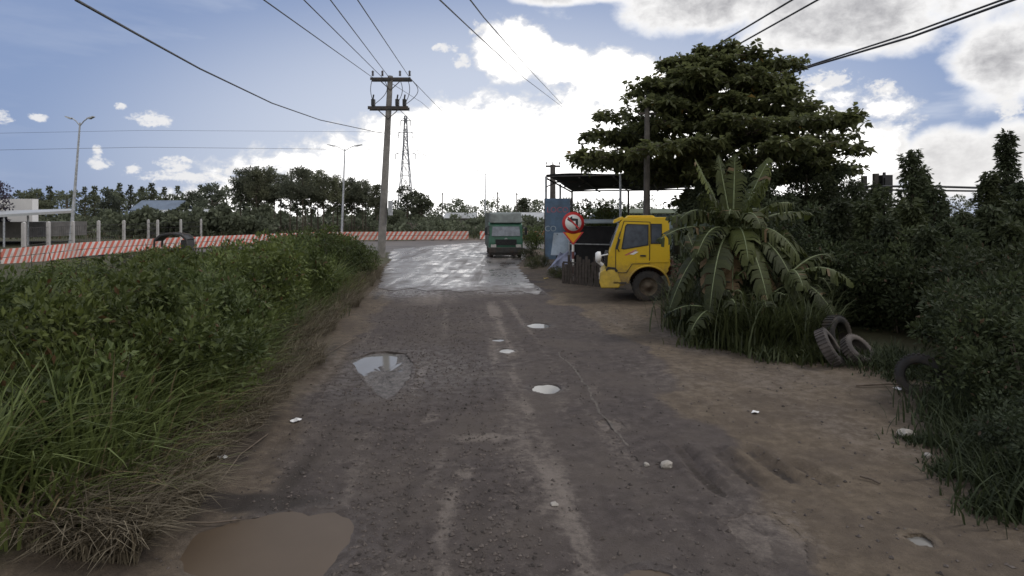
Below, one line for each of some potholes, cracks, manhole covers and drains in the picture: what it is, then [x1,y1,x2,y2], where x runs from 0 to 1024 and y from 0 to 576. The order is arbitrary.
crack [558,352,629,446]
pothole [893,528,945,552]
pothole [527,383,566,395]
pothole [162,505,367,576]
pothole [347,350,417,400]
